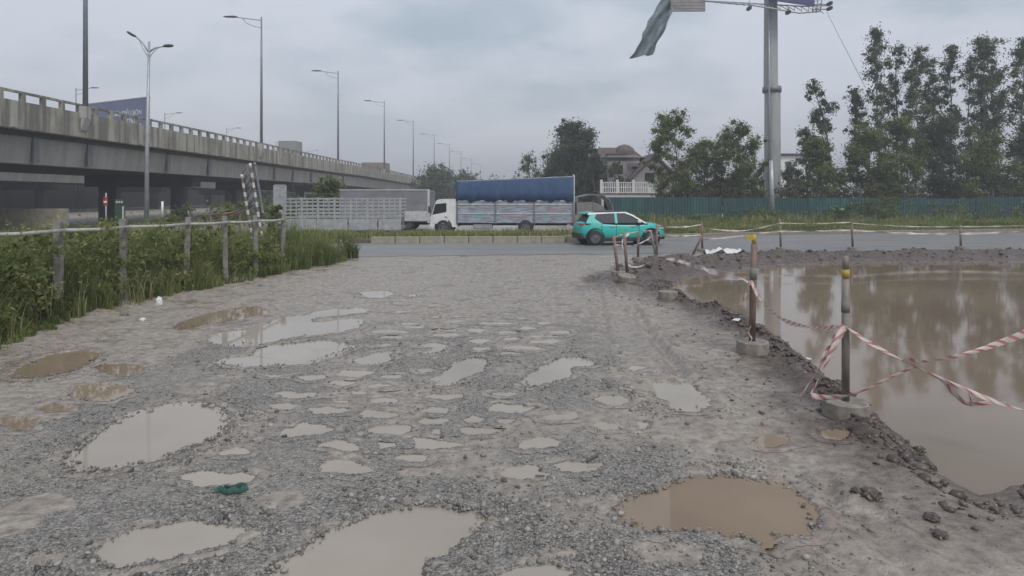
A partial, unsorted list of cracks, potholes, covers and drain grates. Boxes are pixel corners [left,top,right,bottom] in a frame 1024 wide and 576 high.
pothole [806,419,868,444]
pothole [0,347,111,382]
pothole [246,493,502,576]
pothole [43,397,246,480]
pothole [609,376,725,416]
pothole [194,307,378,349]
pothole [162,464,272,494]
pothole [63,510,270,576]
pothole [0,411,53,436]
pothole [58,380,147,405]
pothole [742,428,807,453]
pothole [200,337,364,369]
